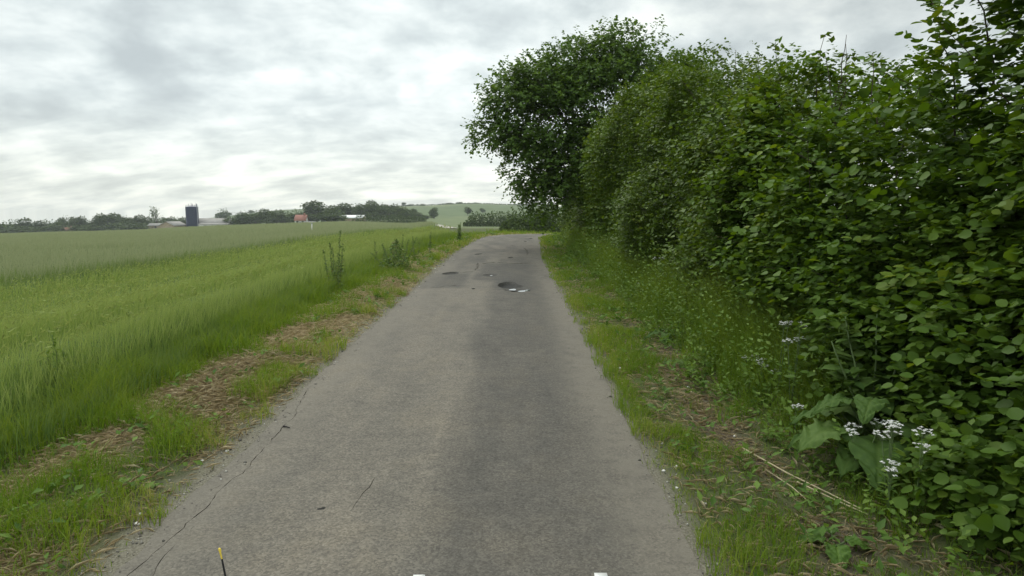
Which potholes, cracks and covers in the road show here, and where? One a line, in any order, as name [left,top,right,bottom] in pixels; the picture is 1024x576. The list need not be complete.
crack [127,392,306,576]
pothole [498,281,531,292]
